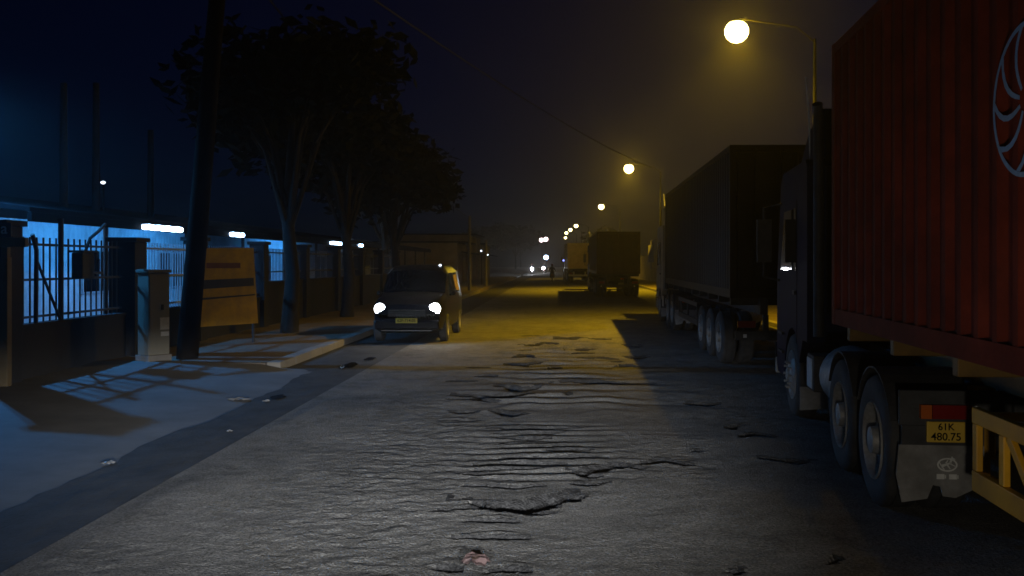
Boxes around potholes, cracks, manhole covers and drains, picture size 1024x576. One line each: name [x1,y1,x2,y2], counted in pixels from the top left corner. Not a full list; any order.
crack [516,335,619,369]
pothole [445,489,589,515]
pothole [756,455,819,465]
crack [445,367,498,382]
crack [437,418,609,490]
